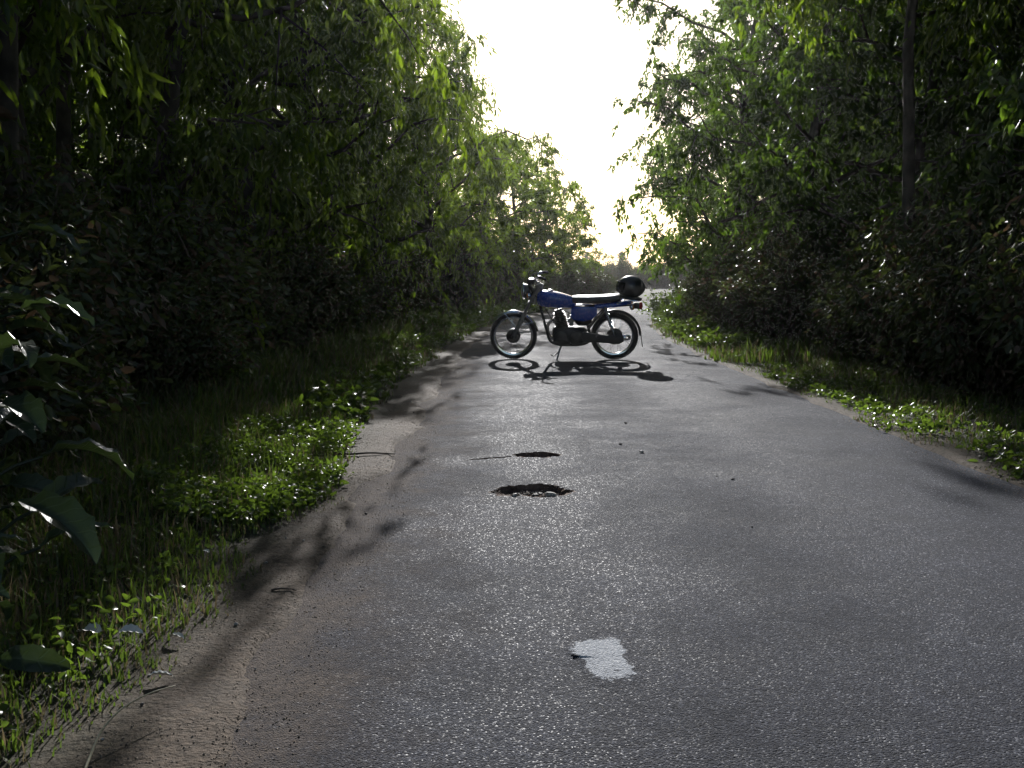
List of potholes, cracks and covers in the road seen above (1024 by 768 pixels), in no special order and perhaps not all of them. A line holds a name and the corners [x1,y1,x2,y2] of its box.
pothole [488,483,576,497]
